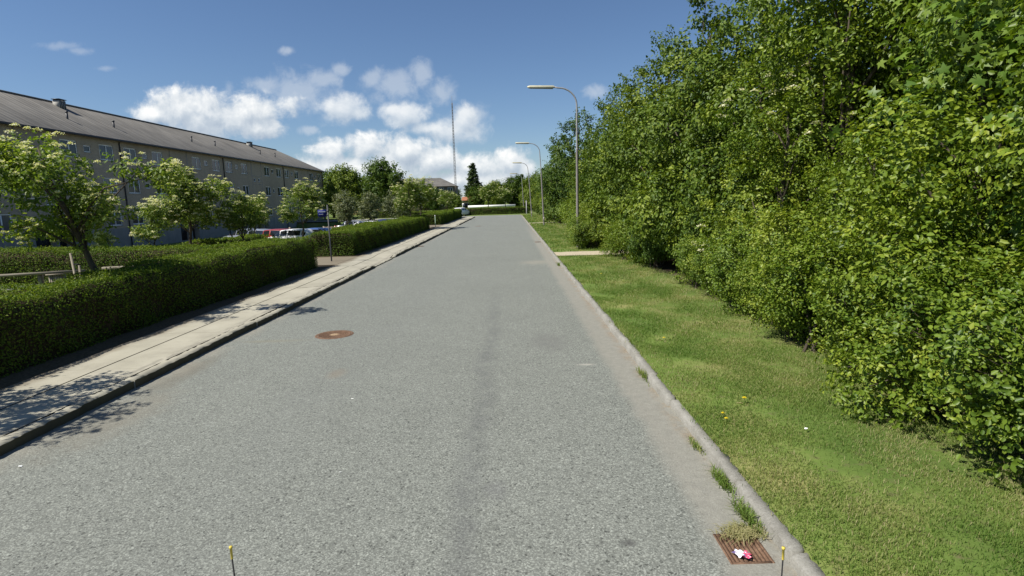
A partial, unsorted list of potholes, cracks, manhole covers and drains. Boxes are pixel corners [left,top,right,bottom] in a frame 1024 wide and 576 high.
drain grate [713,533,775,565]
manhole cover [315,330,354,339]
